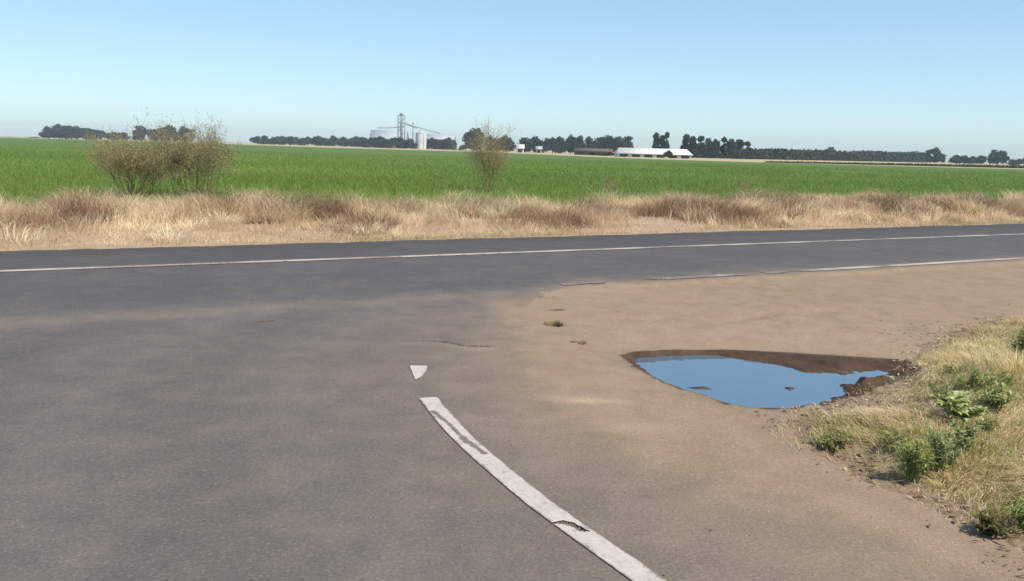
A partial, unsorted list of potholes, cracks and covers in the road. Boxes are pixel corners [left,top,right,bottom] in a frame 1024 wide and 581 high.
crack [552,522,585,532]
pothole [623,350,921,405]
